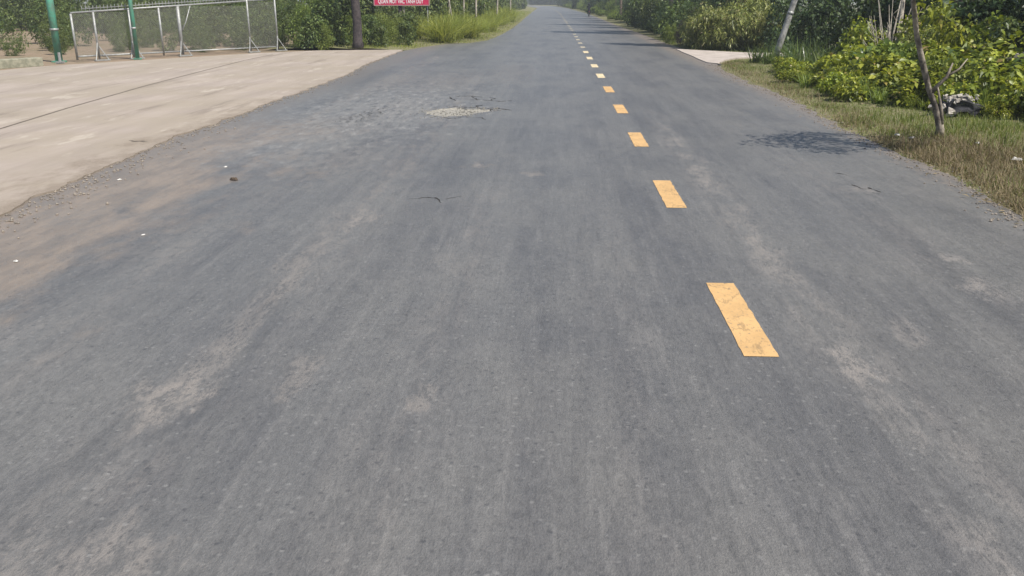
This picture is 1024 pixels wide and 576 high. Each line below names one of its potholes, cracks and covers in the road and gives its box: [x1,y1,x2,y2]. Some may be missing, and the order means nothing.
pothole [420,105,505,119]
